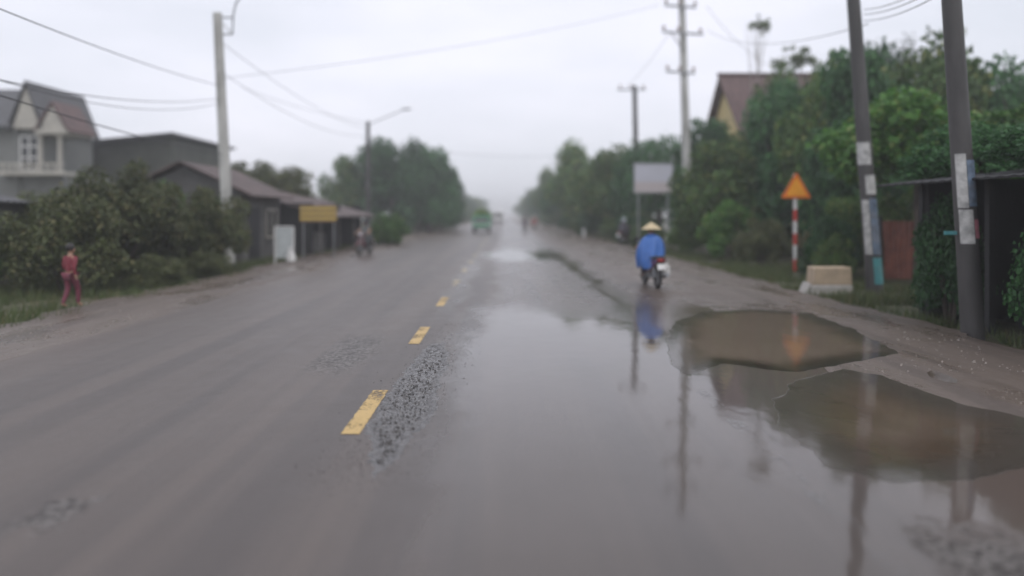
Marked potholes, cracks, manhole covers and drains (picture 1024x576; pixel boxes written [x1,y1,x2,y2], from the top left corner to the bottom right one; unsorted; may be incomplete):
pothole [772,369,1024,483]
pothole [666,309,898,378]
pothole [284,321,481,506]
